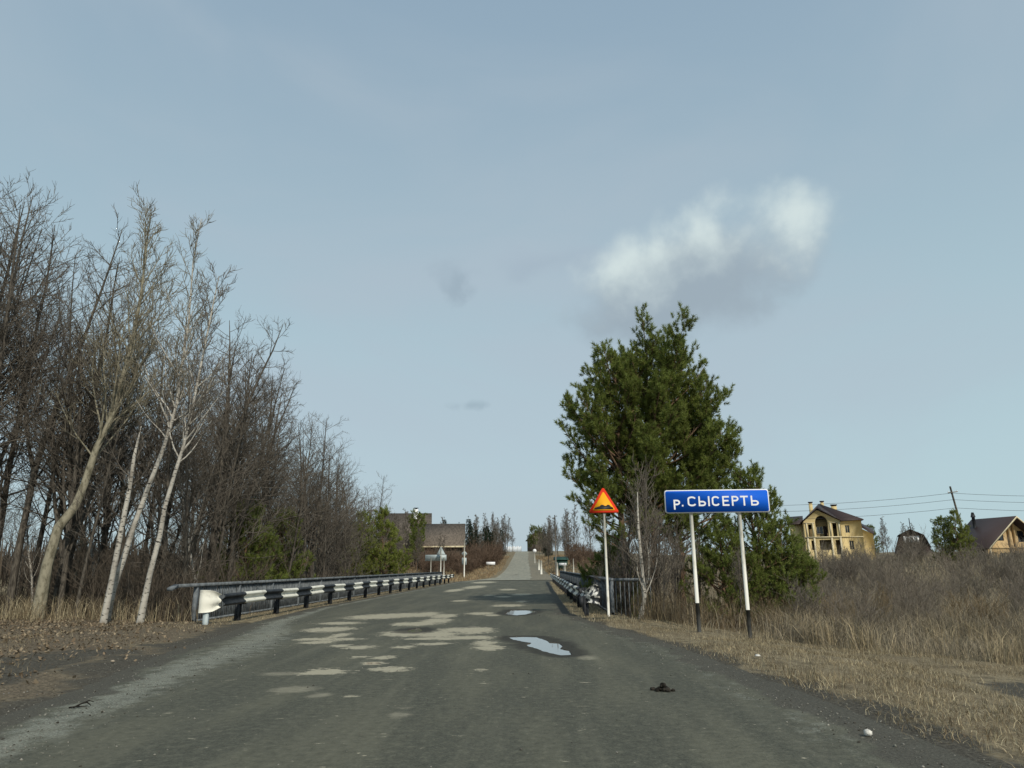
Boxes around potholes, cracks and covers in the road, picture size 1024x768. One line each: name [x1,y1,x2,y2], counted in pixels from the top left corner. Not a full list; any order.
pothole [509,637,572,655]
